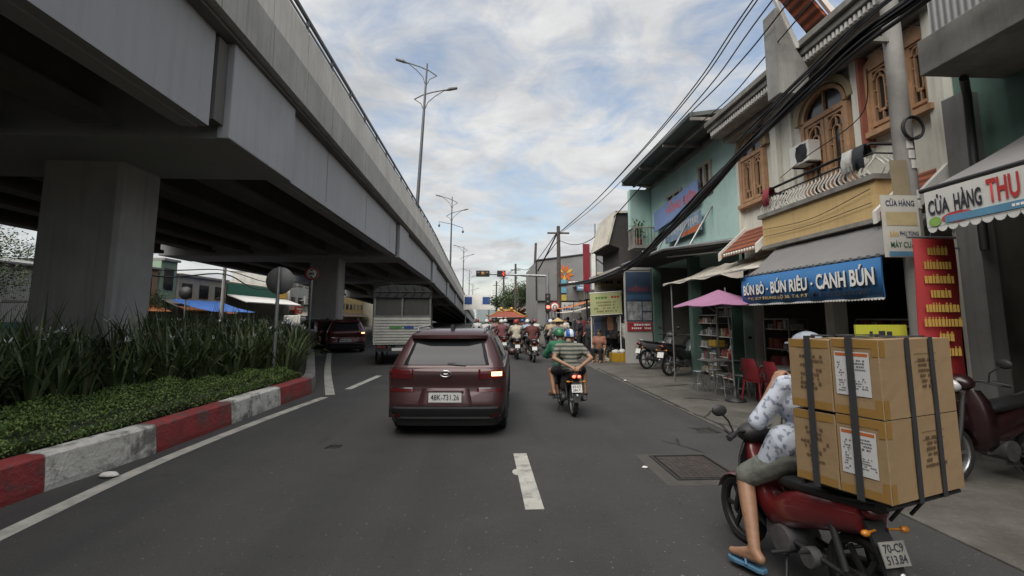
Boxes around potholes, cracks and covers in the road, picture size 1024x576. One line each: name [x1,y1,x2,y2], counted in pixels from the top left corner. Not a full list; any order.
manhole cover [635,453,737,486]
